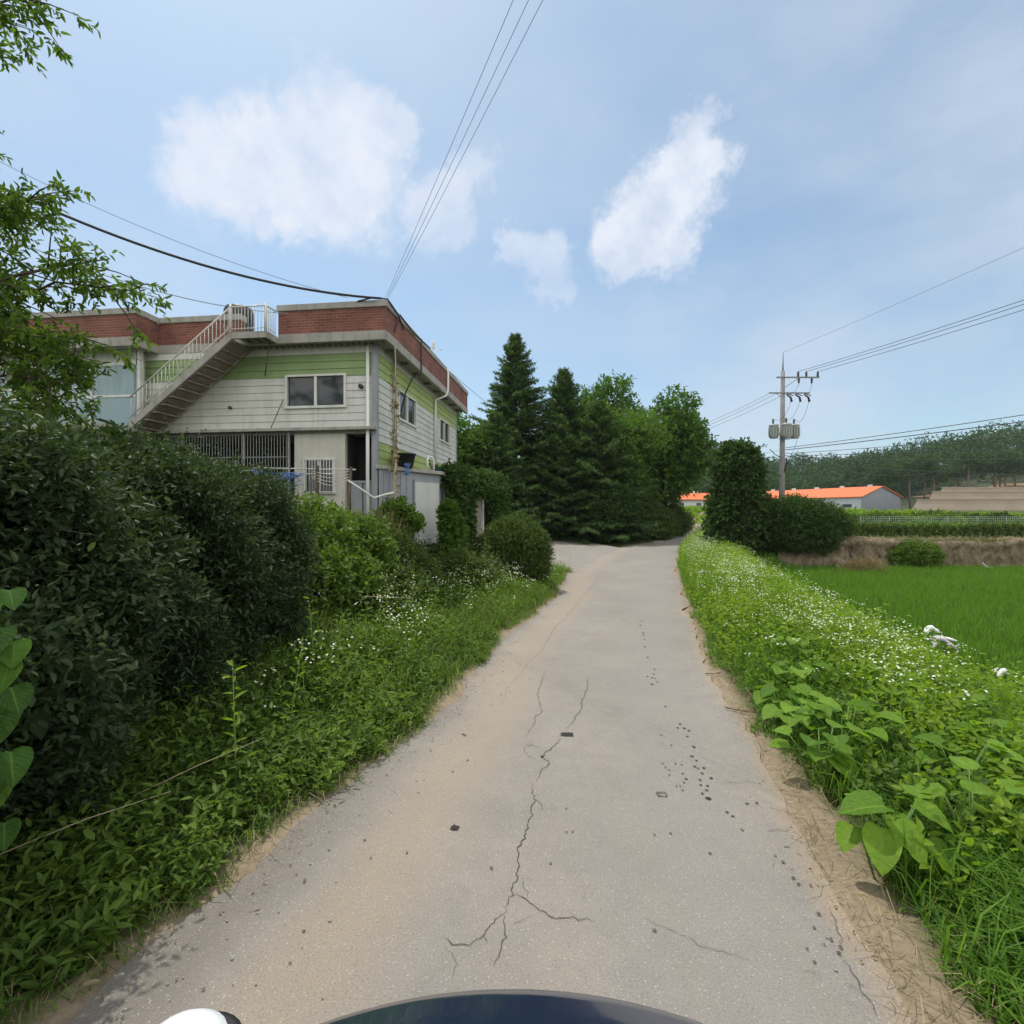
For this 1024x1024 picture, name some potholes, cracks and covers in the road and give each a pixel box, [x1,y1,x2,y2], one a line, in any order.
crack [446,676,593,973]
crack [830,911,875,1011]
